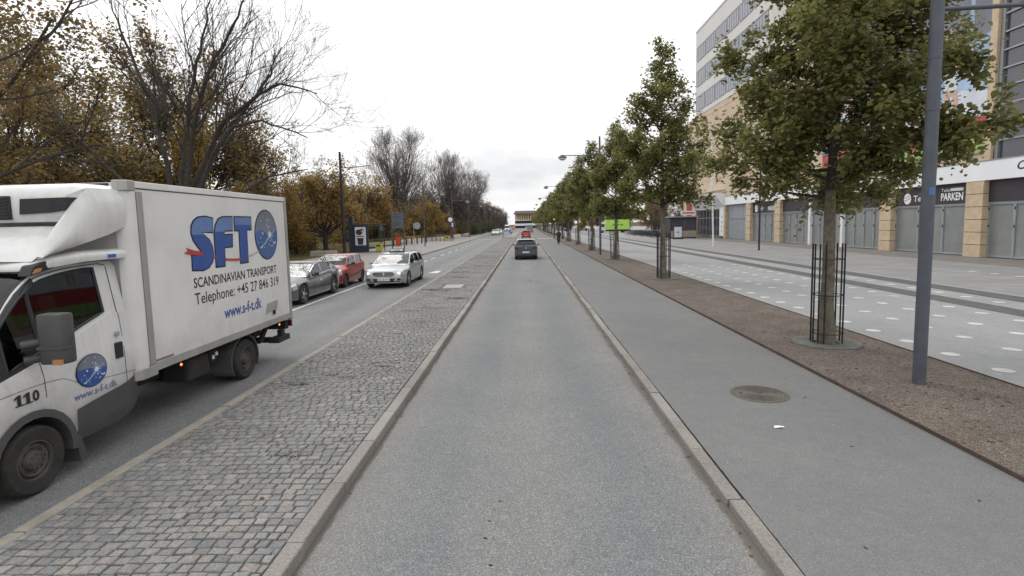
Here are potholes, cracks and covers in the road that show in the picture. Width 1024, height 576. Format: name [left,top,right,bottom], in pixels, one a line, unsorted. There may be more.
manhole cover [730,385,790,403]
